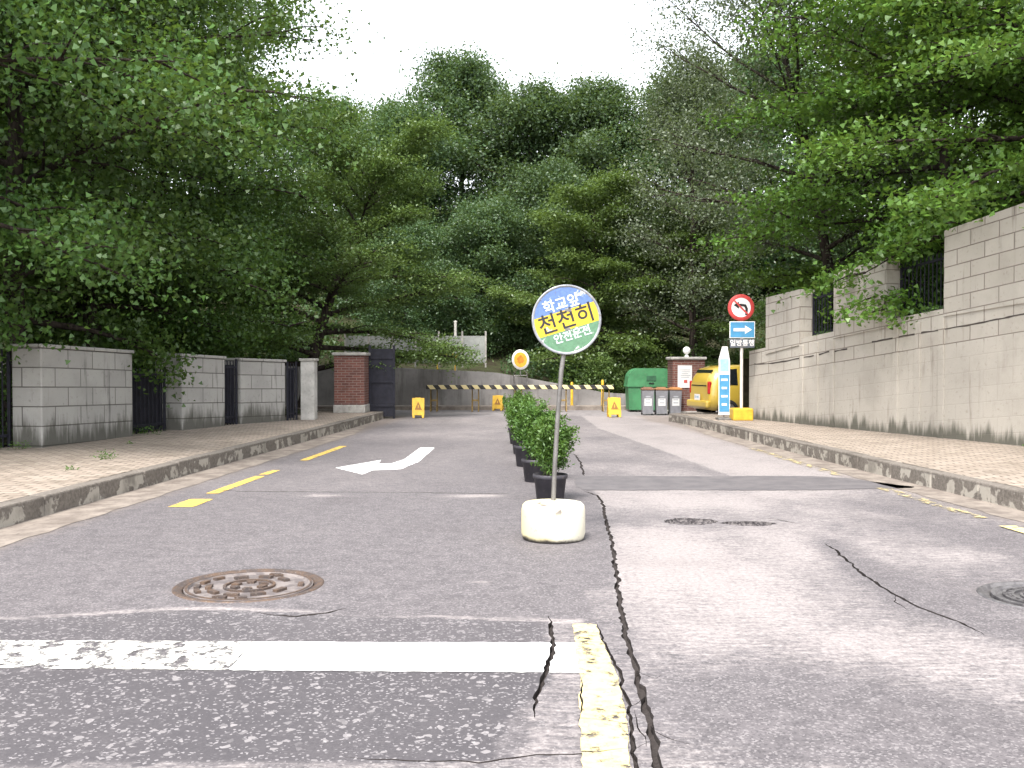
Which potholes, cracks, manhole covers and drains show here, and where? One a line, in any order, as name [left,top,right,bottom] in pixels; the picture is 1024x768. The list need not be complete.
crack [824,543,983,634]
manhole cover [172,569,324,603]
crack [257,608,345,617]
manhole cover [976,581,1024,609]
crack [350,454,688,768]
